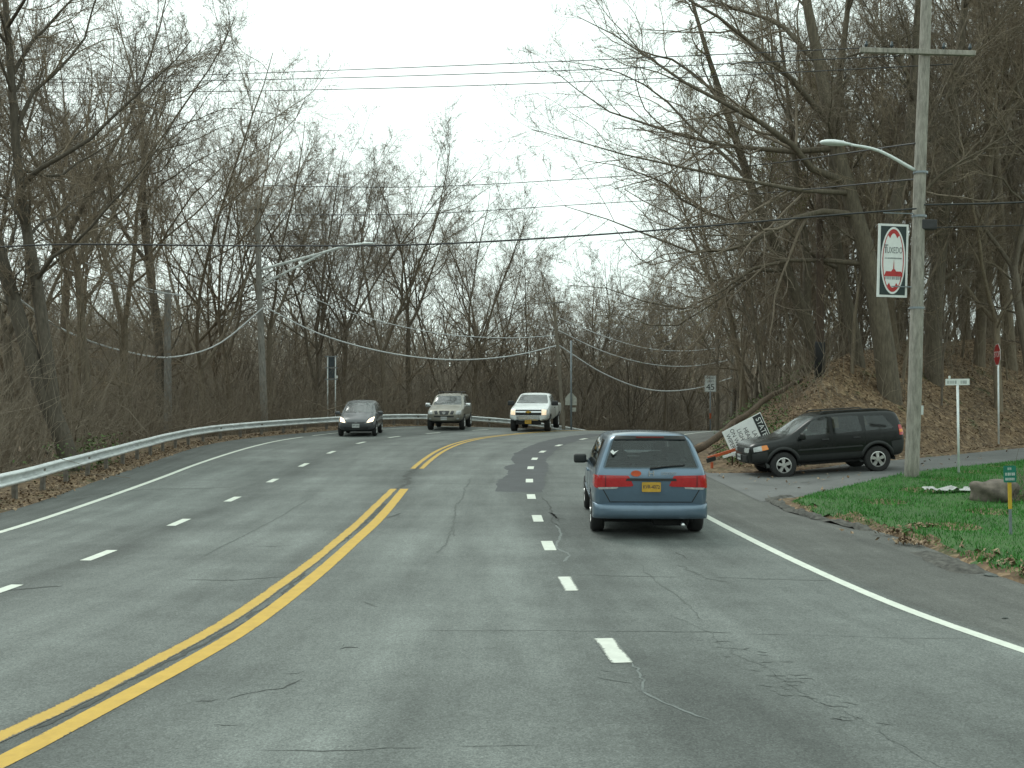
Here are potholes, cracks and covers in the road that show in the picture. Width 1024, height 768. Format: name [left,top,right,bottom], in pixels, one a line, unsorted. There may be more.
crack [196,672,302,702]
crack [453,497,939,766]
crack [436,478,485,553]
